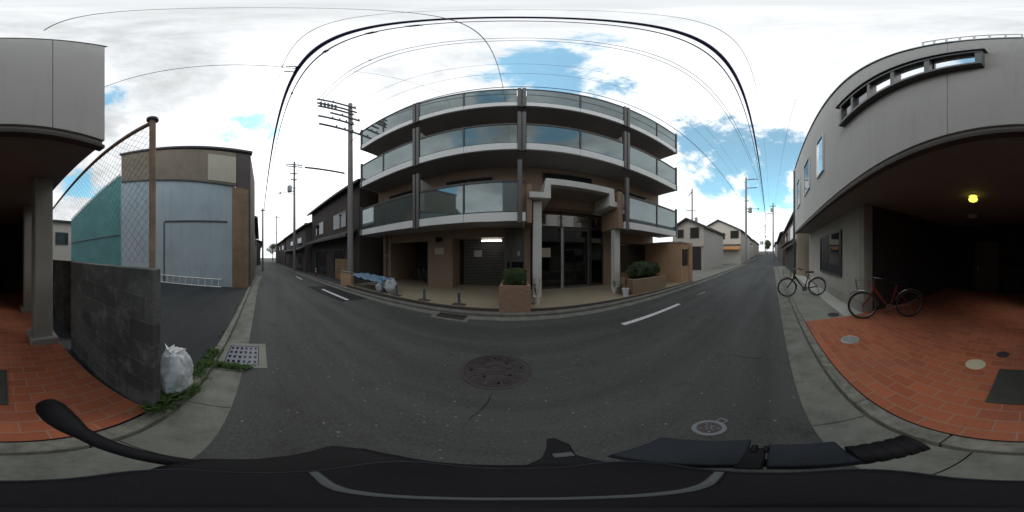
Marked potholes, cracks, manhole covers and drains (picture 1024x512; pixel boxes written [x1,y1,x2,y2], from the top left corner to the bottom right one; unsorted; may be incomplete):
utility cover [692,418,729,436]
drain grate [218,342,267,368]
drain grate [430,311,472,322]
manhole cover [460,354,532,390]
